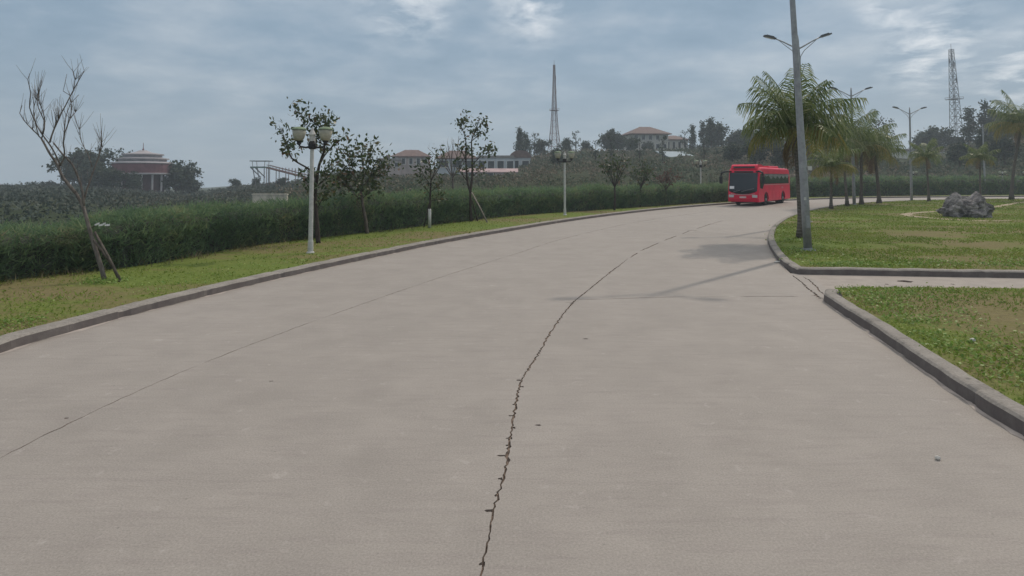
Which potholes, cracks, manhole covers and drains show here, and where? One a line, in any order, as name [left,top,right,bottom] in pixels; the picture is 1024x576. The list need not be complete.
crack [8,214,767,576]
crack [793,276,824,299]
